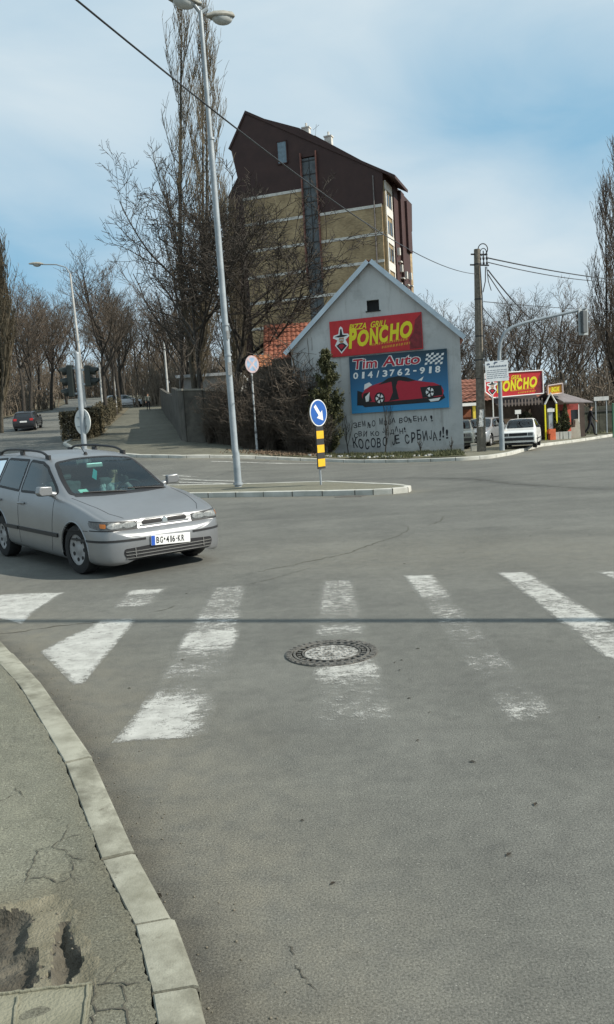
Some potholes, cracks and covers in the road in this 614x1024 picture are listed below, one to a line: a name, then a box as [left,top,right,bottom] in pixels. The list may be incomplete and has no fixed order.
crack [23,826,94,886]
manhole cover [286,639,378,667]
pothole [0,906,42,992]
crack [247,528,408,585]
pothole [45,921,85,986]
